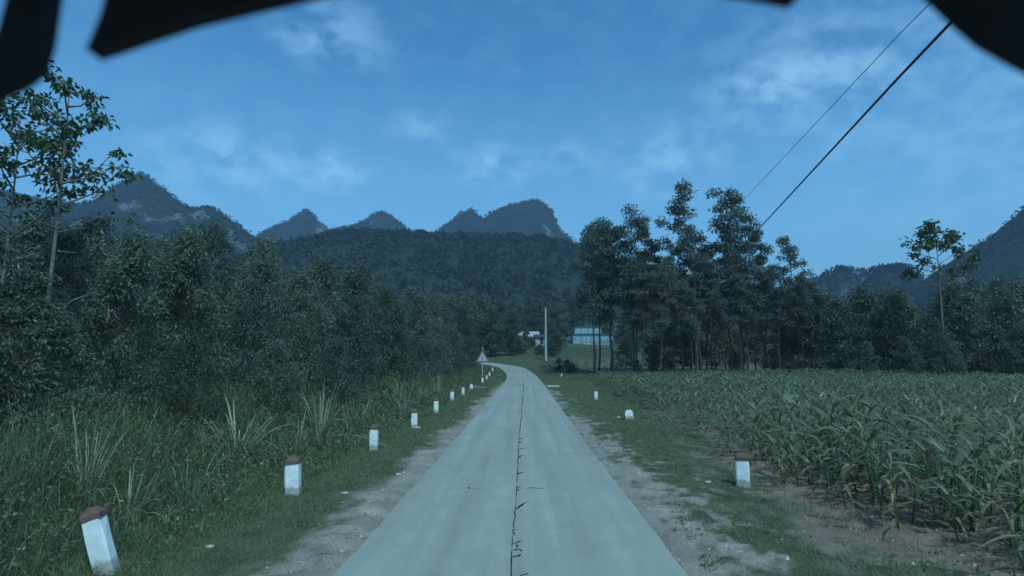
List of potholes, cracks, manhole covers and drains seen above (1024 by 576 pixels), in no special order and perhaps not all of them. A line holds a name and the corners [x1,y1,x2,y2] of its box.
crack [468,381,544,576]
